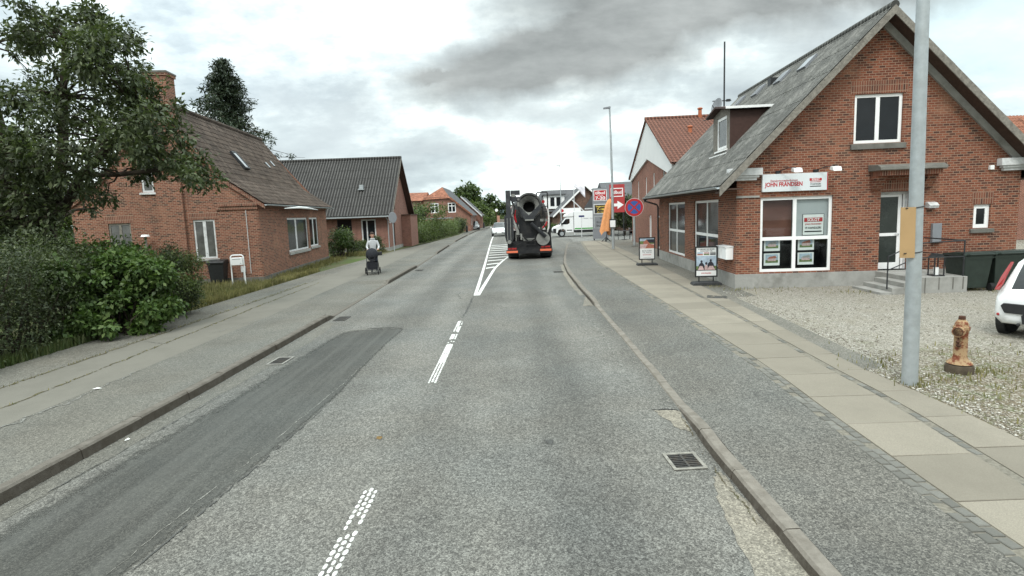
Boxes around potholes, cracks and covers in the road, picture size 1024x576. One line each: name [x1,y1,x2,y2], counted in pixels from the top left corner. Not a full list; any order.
pothole [654,410,692,432]
drain grate [266,357,294,365]
drain grate [662,452,708,471]
